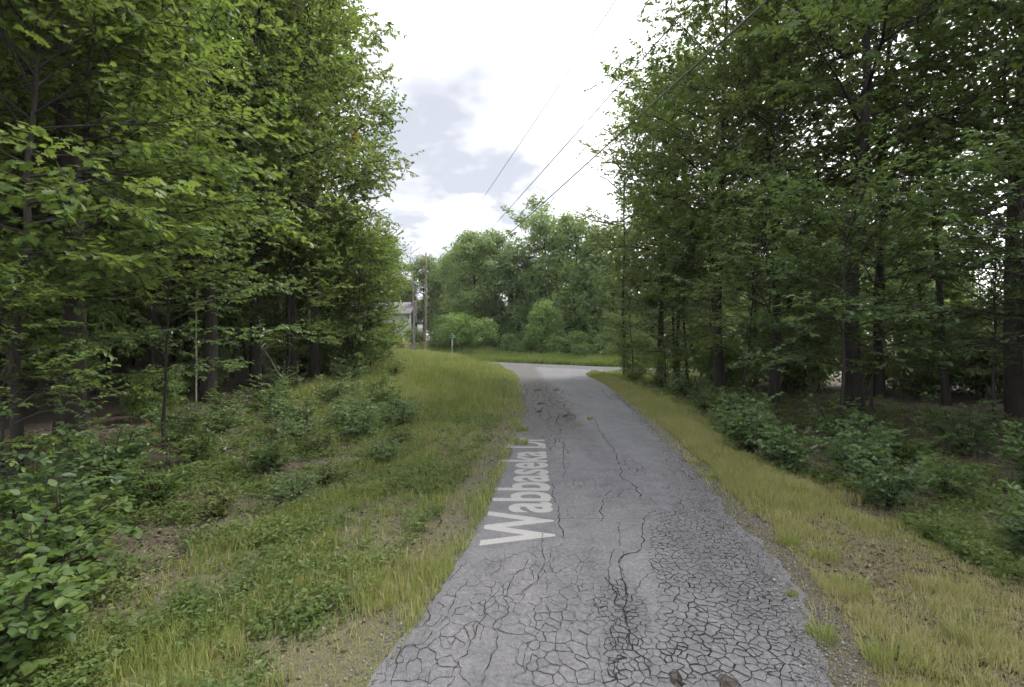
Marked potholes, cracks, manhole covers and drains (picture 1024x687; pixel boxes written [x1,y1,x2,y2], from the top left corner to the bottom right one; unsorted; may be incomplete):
crack [381,382,828,687]
